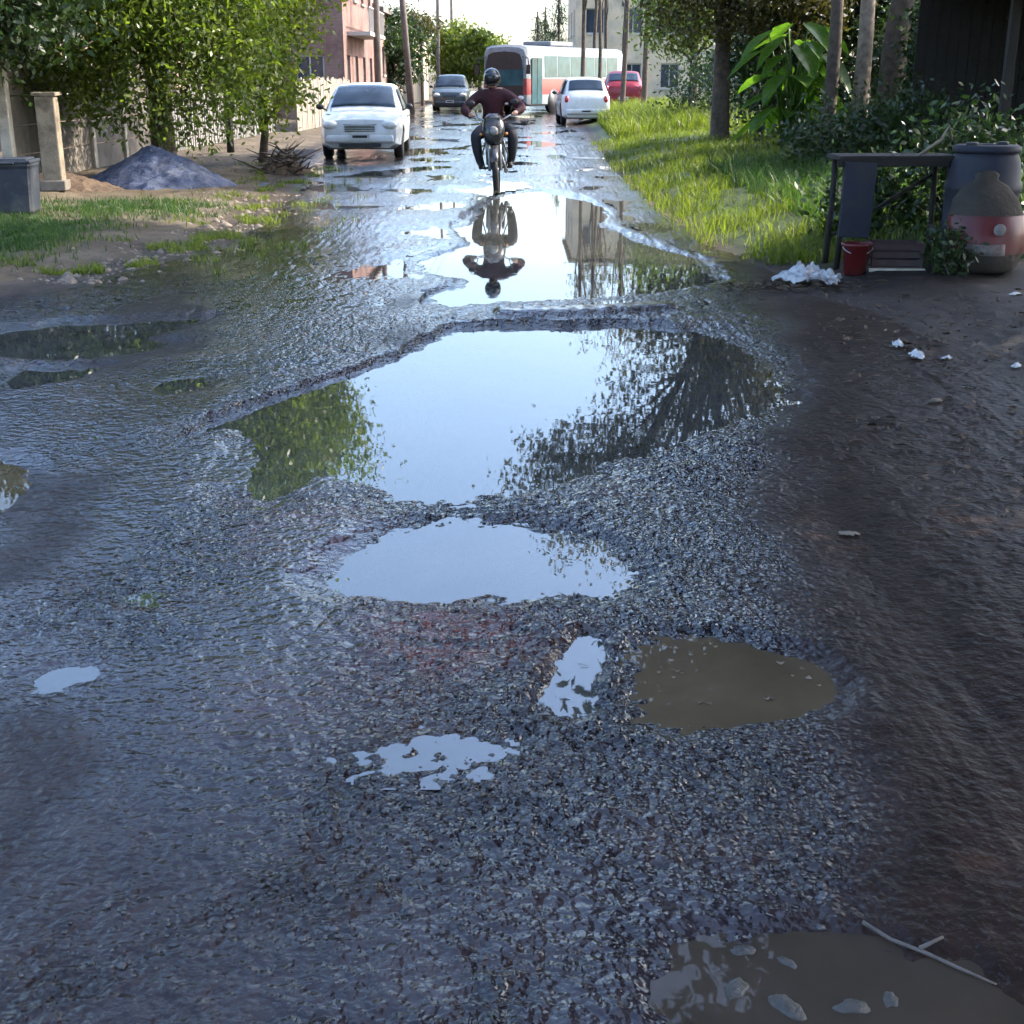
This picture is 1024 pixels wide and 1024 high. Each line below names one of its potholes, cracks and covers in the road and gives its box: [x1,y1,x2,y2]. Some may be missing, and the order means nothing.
pothole [0,453,47,513]
pothole [173,317,803,513]
pothole [416,189,727,307]
pothole [0,360,118,390]
pothole [529,625,620,722]
pothole [296,512,659,611]
pothole [610,626,863,736]
pothole [643,916,1024,1024]
pothole [0,313,218,361]
